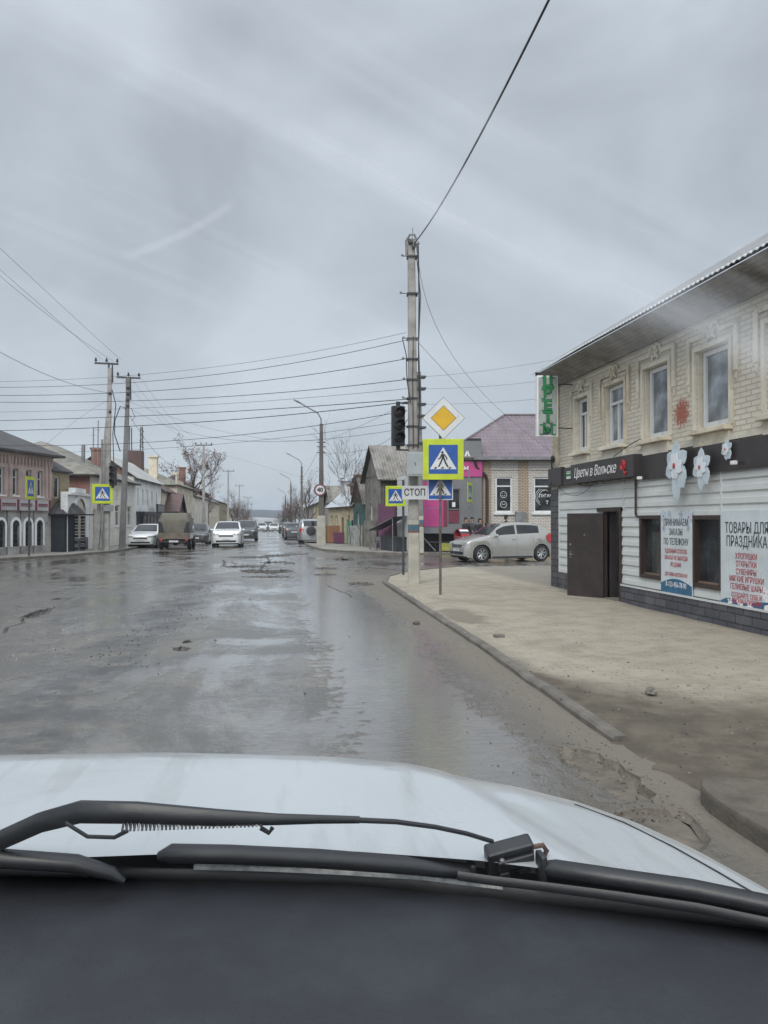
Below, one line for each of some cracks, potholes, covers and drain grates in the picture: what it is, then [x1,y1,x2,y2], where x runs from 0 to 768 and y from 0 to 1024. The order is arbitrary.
pothole [19,608,52,619]
pothole [551,743,664,806]
